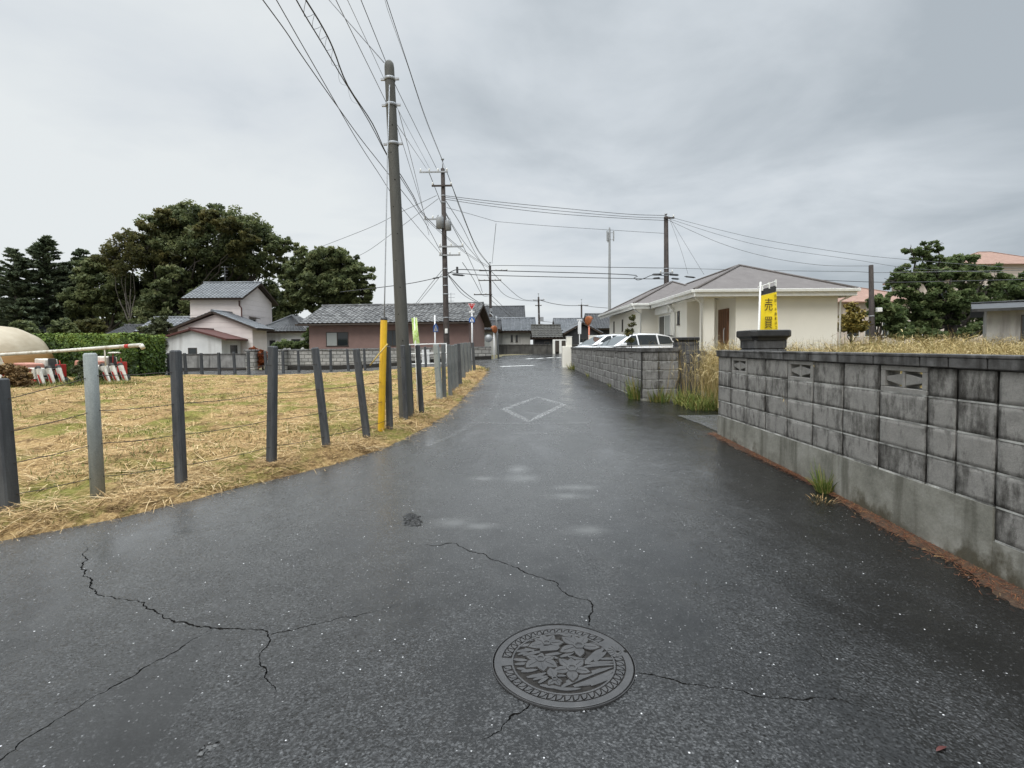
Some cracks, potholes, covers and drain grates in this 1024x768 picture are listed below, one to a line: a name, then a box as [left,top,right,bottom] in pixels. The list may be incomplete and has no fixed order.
crack [478,705,530,743]
crack [412,543,594,625]
crack [639,673,888,713]
pothole [403,513,423,527]
manhole cover [492,624,636,711]
crack [0,546,400,761]
